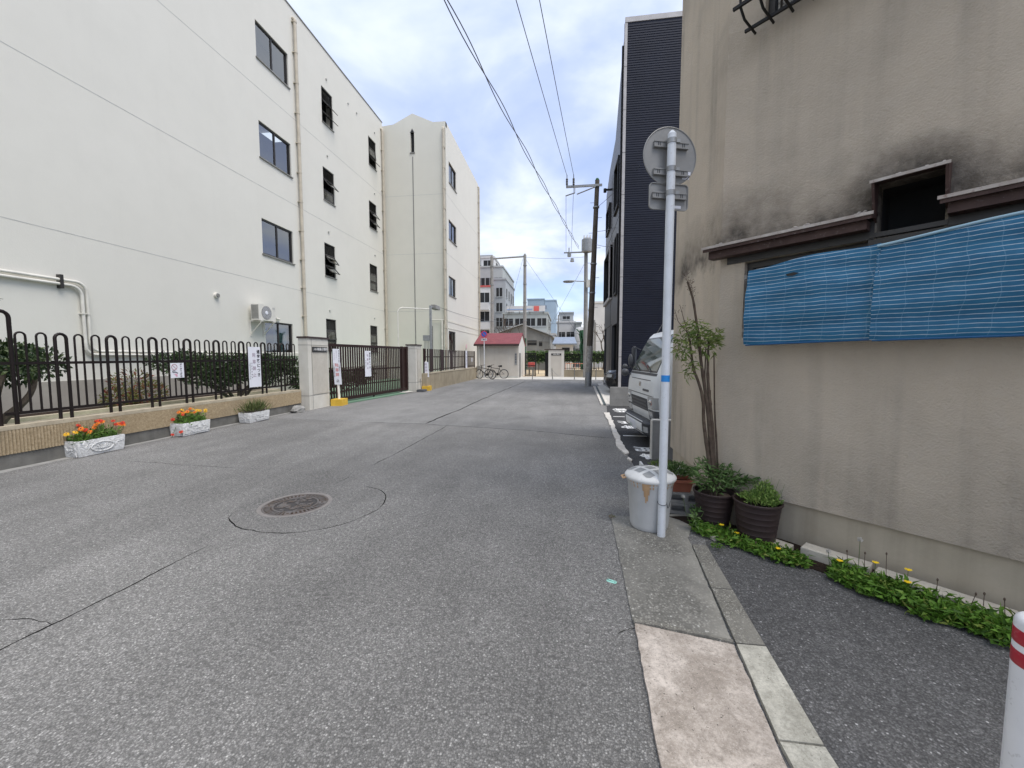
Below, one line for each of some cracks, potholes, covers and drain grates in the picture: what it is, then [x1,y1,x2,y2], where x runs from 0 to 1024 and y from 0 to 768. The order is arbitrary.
crack [0,548,203,650]
manhole cover [256,493,332,517]
